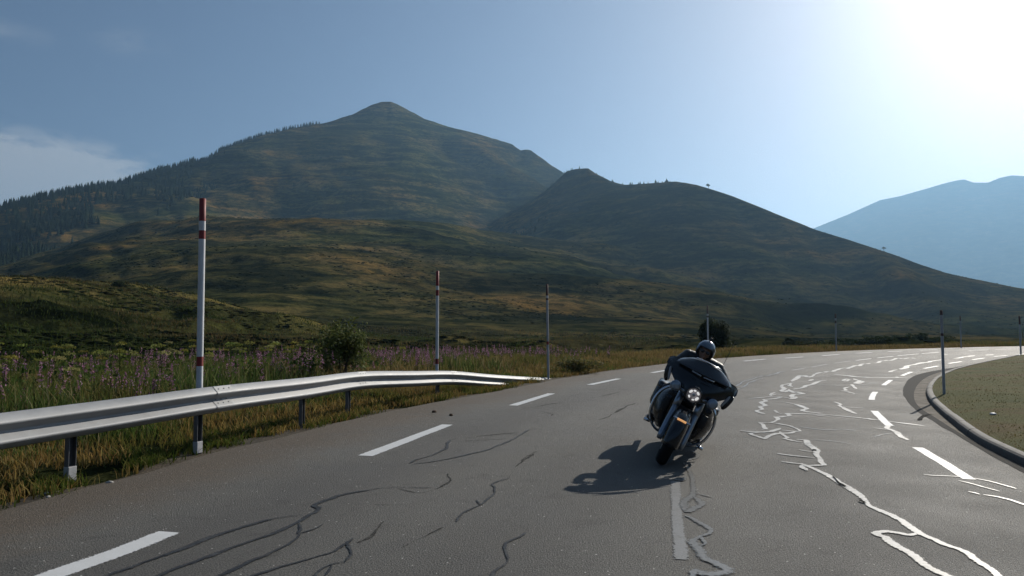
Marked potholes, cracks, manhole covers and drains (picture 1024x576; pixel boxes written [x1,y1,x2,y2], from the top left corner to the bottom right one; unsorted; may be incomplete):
crack [736,354,1024,576]
crack [105,430,537,576]
crack [676,451,733,576]
